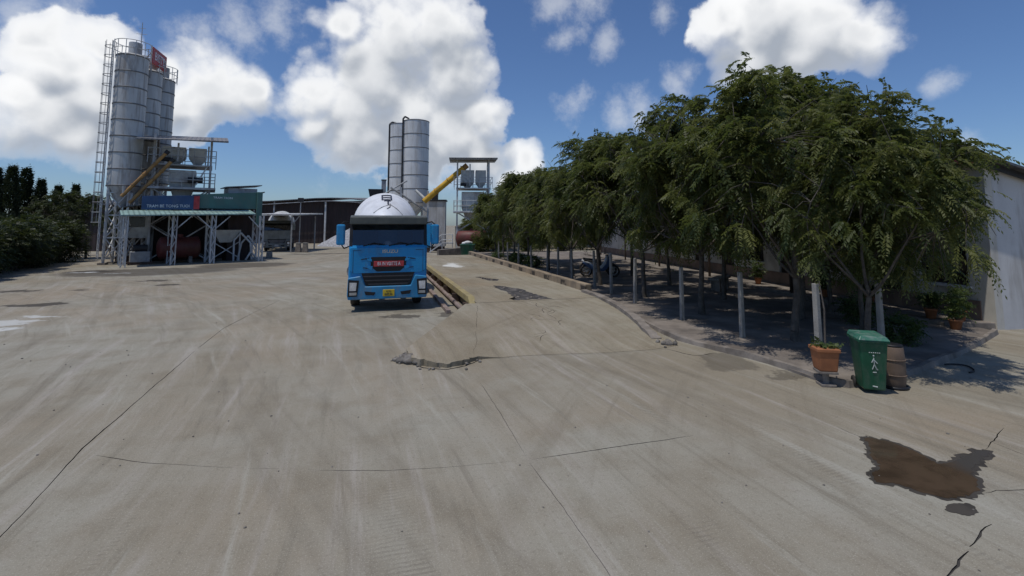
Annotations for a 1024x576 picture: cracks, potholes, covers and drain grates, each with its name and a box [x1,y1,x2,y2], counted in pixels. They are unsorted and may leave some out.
crack [498,302,611,359]
crack [947,524,992,576]
